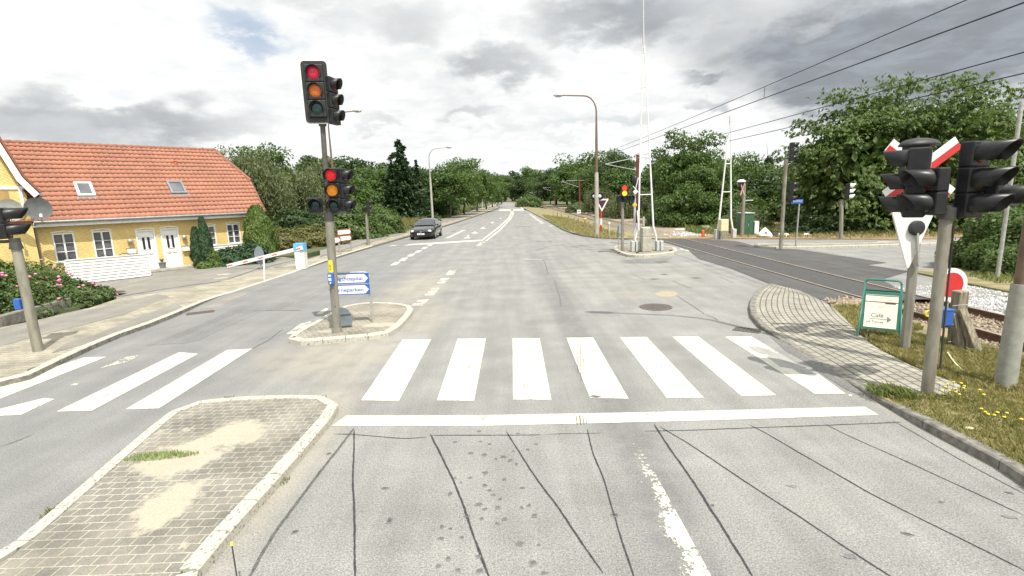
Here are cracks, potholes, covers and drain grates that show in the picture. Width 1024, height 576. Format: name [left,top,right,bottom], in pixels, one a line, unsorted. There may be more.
manhole cover [639,303,673,311]
drain grate [733,326,762,334]
